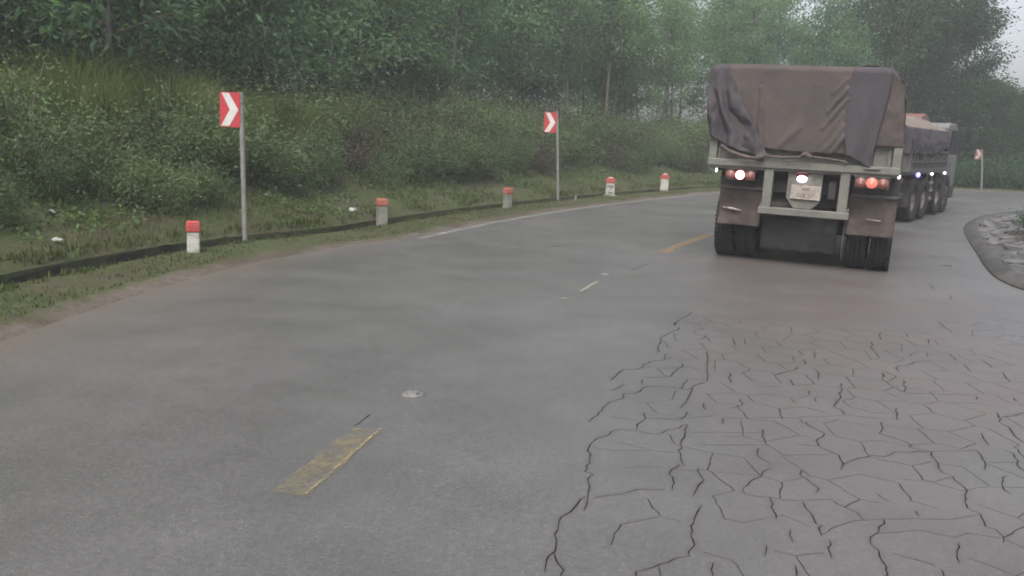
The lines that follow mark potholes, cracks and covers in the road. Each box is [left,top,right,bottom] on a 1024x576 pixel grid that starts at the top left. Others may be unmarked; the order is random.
crack [544,284,1024,576]
